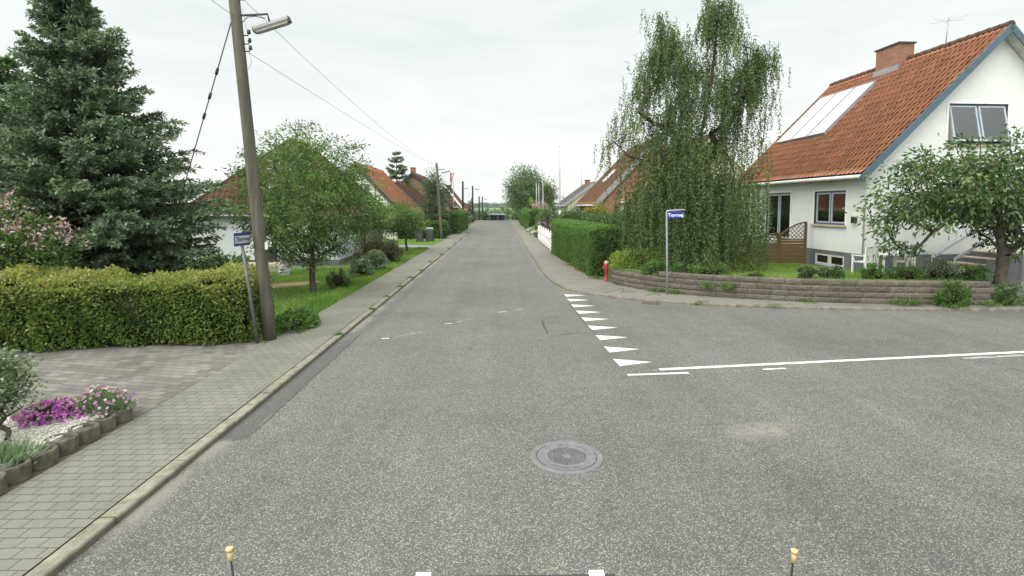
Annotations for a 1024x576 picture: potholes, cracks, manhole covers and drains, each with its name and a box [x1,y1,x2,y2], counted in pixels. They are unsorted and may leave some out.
crack [537,317,592,336]
manhole cover [530,441,604,474]
